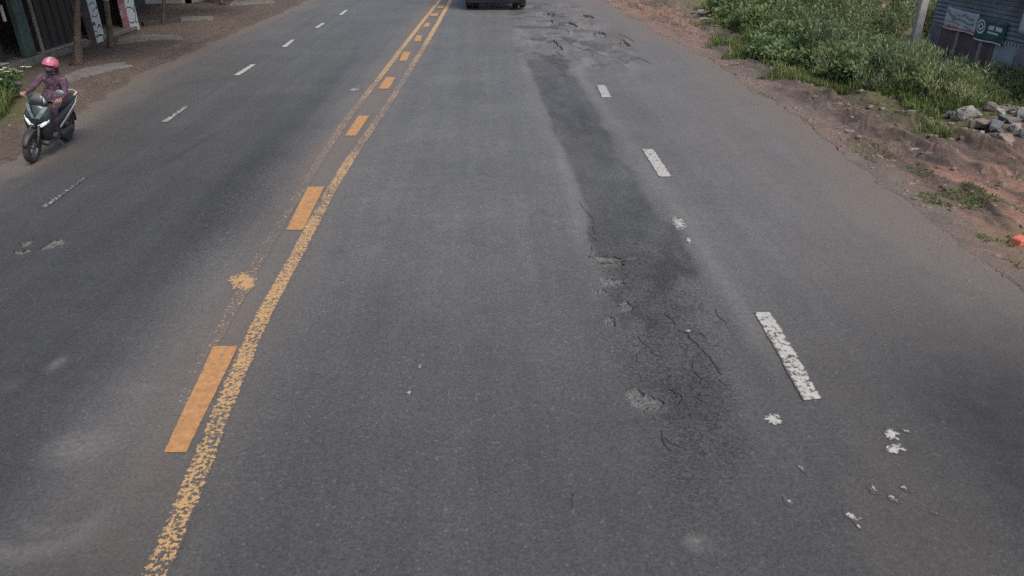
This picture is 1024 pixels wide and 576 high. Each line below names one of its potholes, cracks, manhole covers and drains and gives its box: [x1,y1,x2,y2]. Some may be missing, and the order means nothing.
pothole [12,237,43,251]
pothole [584,287,612,298]
pothole [579,253,631,271]
pothole [532,11,562,21]
pothole [620,386,670,416]
pothole [577,31,614,40]
crack [574,201,642,268]
crack [665,309,728,405]
pothole [612,299,639,315]
pothole [545,40,570,53]
pothole [605,39,637,48]
pothole [6,247,37,258]
